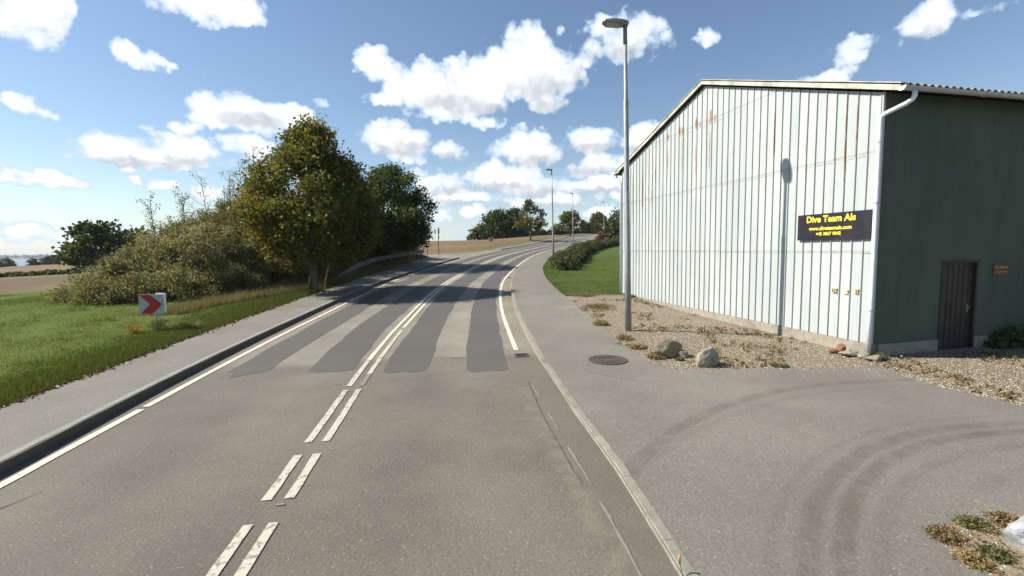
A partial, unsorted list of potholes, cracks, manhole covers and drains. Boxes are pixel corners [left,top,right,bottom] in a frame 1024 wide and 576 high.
manhole cover [588,355,628,365]
